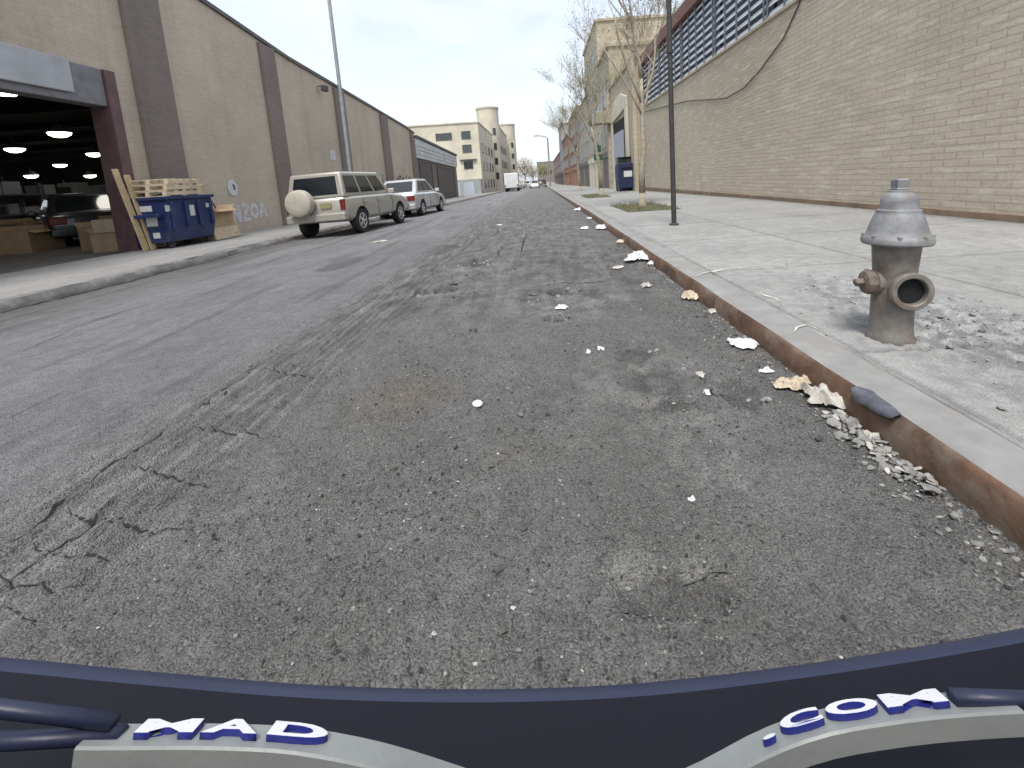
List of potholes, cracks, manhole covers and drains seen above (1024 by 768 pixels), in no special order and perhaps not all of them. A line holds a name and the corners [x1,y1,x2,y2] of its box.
crack [627,572,730,592]
crack [0,365,264,621]
